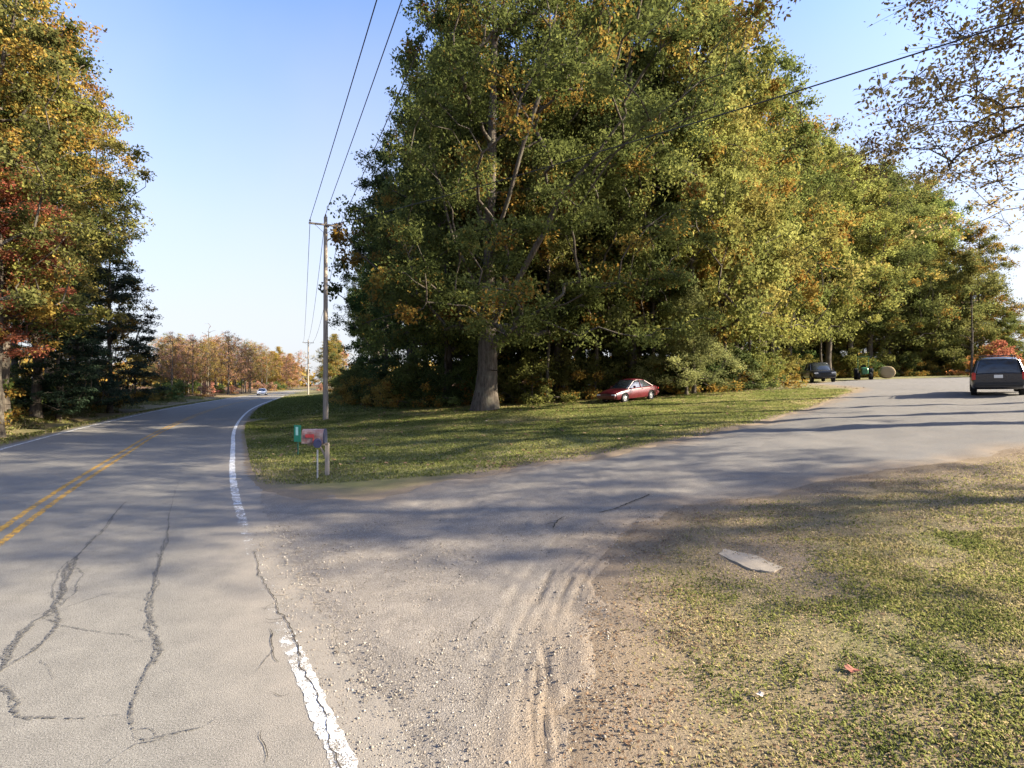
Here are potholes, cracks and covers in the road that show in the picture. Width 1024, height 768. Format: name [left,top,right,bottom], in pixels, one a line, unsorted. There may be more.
crack [254,548,346,768]
crack [0,485,215,763]
